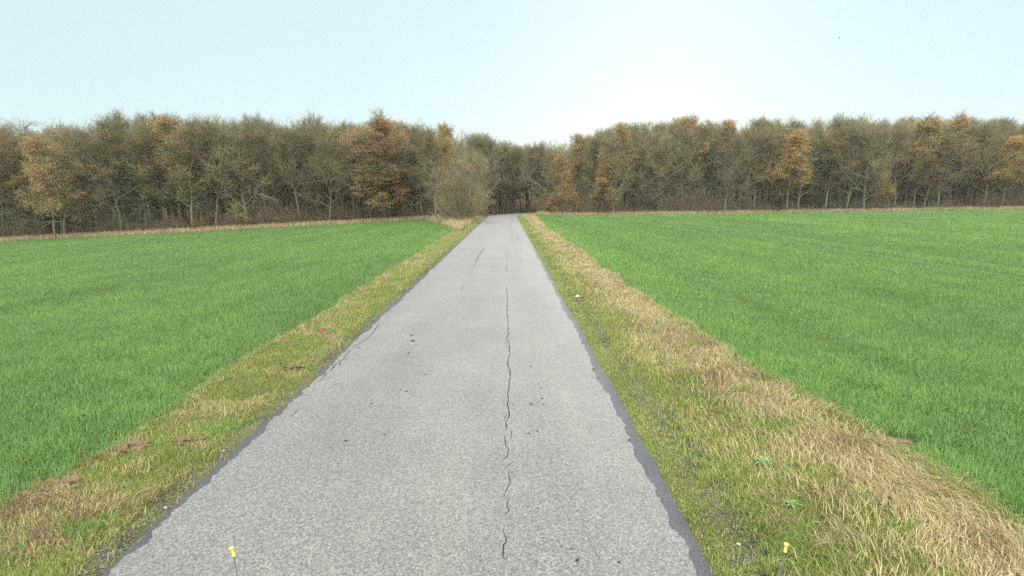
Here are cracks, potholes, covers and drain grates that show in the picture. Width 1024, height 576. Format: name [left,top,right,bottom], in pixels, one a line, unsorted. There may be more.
crack [291,311,392,416]
crack [502,287,514,560]
